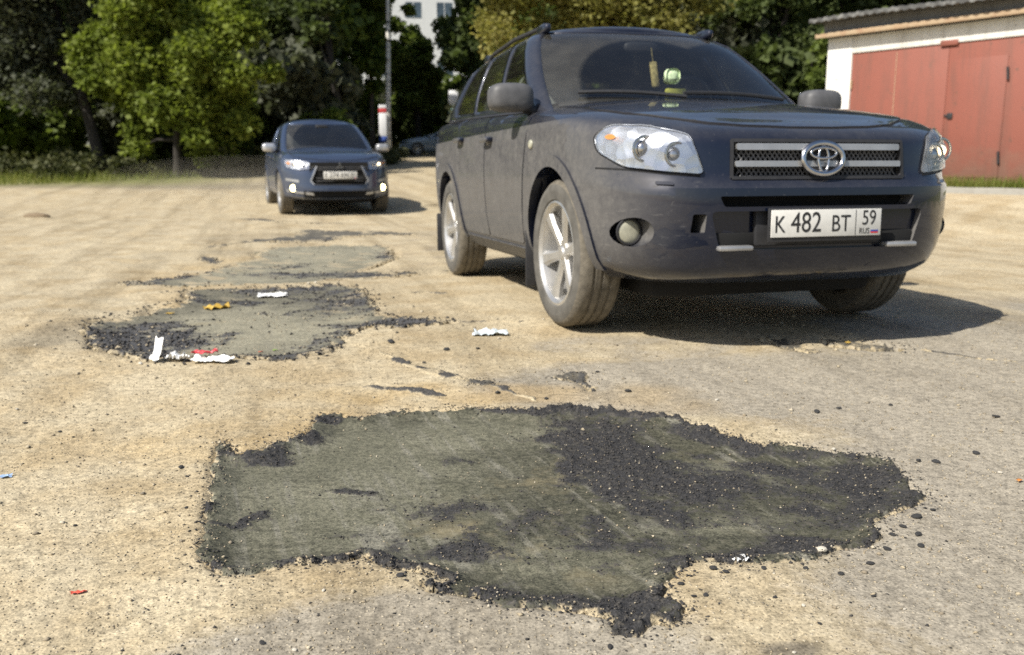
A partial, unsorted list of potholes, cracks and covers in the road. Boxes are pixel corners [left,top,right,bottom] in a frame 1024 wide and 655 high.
crack [490,384,537,402]
pothole [553,371,598,392]
crack [354,344,469,397]
